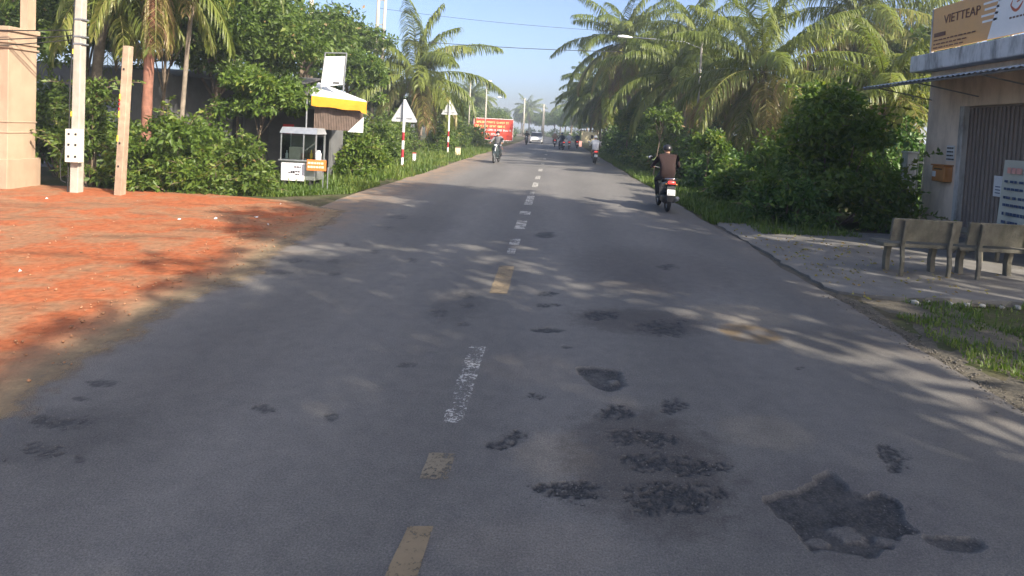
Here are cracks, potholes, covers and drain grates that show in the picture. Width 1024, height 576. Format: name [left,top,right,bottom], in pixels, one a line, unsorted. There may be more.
pothole [606,445,748,483]
pothole [481,429,531,453]
pothole [654,396,691,416]
pothole [752,466,936,567]
pothole [627,316,701,339]
pothole [573,364,637,395]
pothole [608,472,742,530]
pothole [873,442,914,475]
pothole [595,422,695,456]
